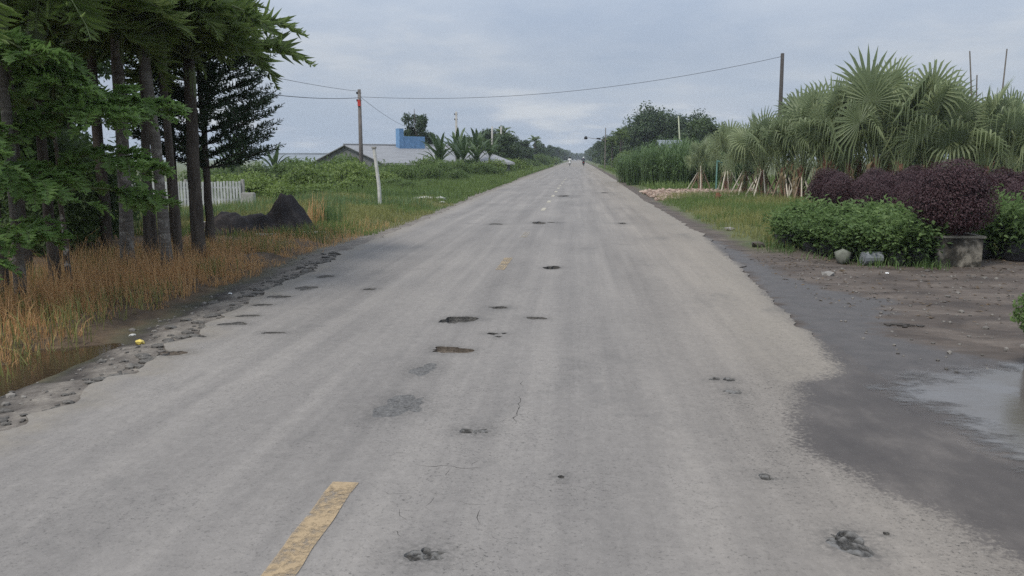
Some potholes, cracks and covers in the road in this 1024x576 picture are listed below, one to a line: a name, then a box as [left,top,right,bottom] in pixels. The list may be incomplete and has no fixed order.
pothole [825,530,875,558]
pothole [404,547,446,561]
